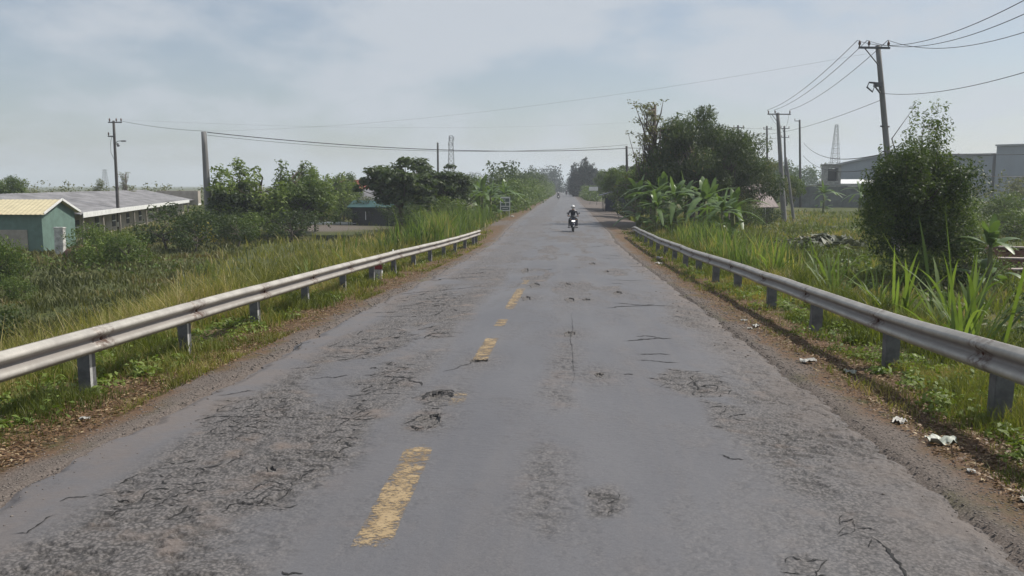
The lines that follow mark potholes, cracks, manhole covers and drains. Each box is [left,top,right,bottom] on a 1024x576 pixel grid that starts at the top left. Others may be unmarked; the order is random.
crack [220,269,488,513]
crack [628,335,748,433]
crack [838,515,907,576]
crack [98,390,294,520]
pothole [414,412,442,429]
pothole [427,390,455,402]
crack [781,556,827,576]
